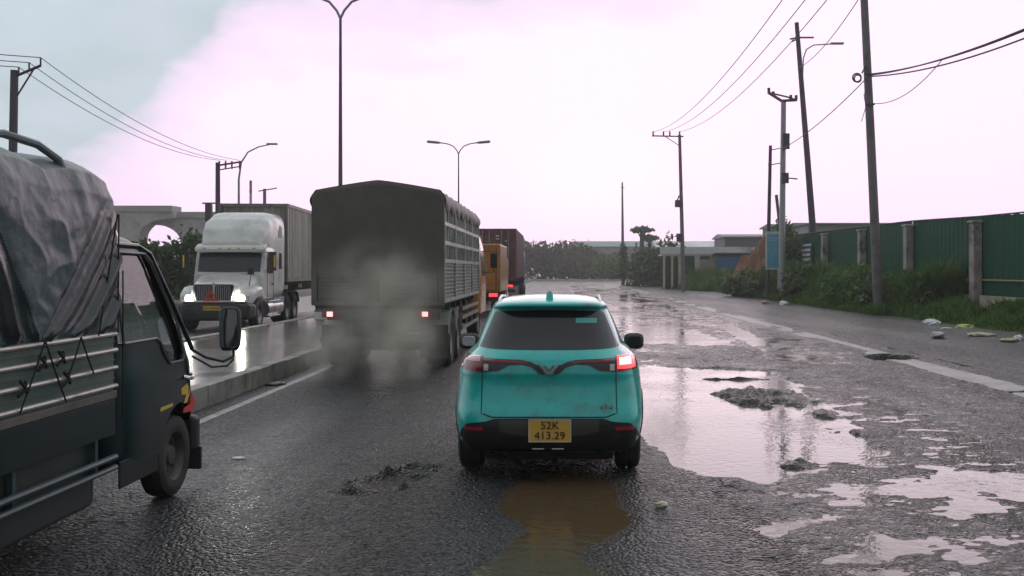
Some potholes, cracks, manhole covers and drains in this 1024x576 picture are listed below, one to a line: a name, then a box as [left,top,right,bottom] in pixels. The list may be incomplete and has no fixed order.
pothole [464,469,646,576]
pothole [327,461,449,496]
pothole [862,353,922,361]
pothole [641,366,885,481]
